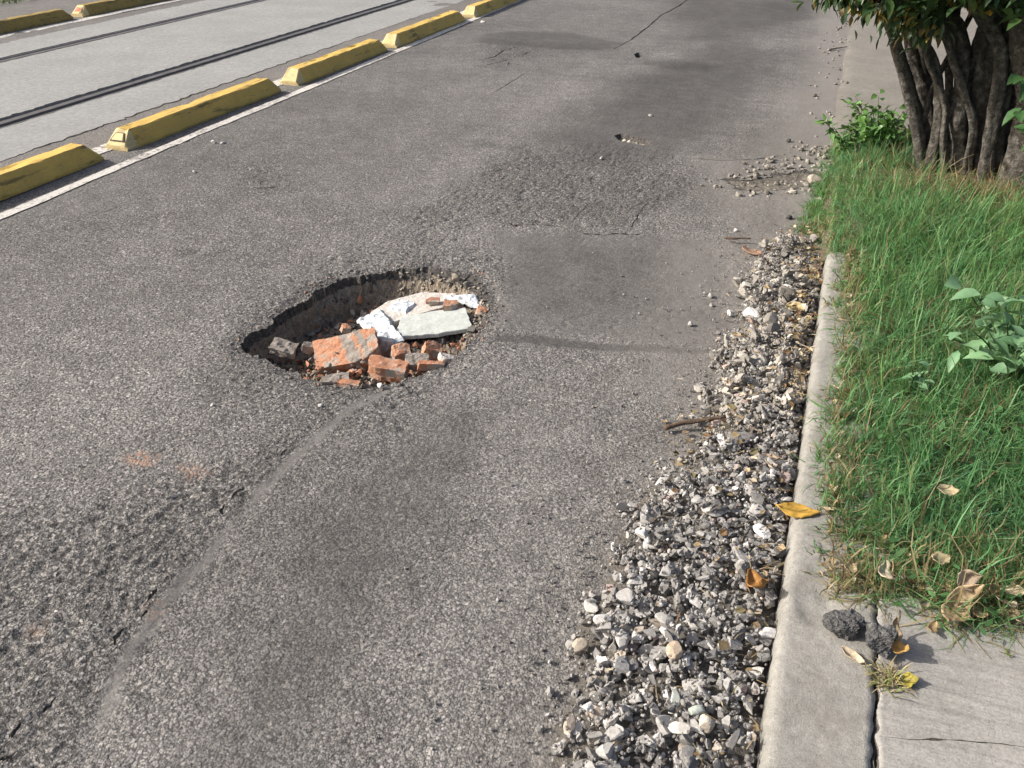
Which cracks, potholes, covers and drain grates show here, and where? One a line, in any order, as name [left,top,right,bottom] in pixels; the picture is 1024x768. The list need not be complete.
crack [611,0,687,51]
crack [498,198,652,236]
pothole [239,267,494,388]
crack [0,449,287,761]
crack [486,46,537,93]
pothole [615,134,653,146]
